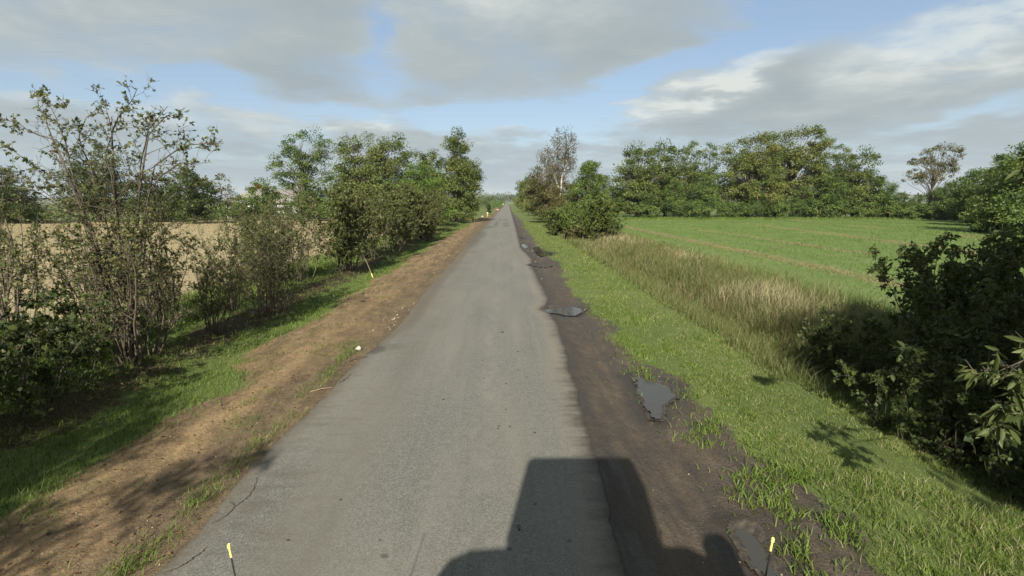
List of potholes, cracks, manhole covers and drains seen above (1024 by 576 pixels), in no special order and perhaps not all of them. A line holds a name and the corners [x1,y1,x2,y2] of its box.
pothole [540,303,589,317]
pothole [533,247,556,257]
pothole [726,518,791,576]
pothole [631,373,682,421]
pothole [528,260,559,268]
